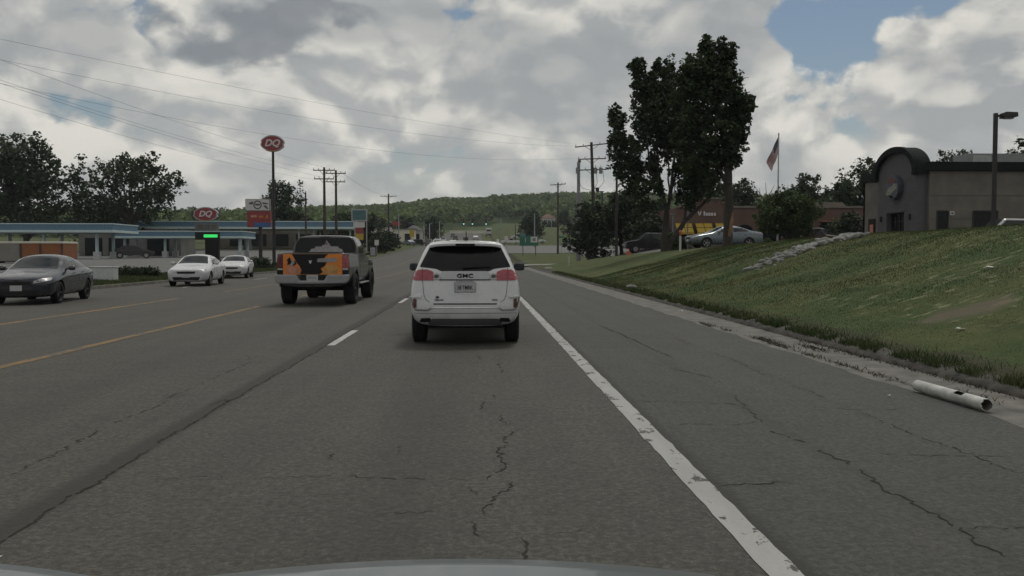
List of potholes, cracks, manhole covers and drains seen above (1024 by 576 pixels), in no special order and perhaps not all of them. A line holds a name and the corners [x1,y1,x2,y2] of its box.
crack [144,395,517,536]
crack [13,357,250,474]
crack [601,322,1019,556]
